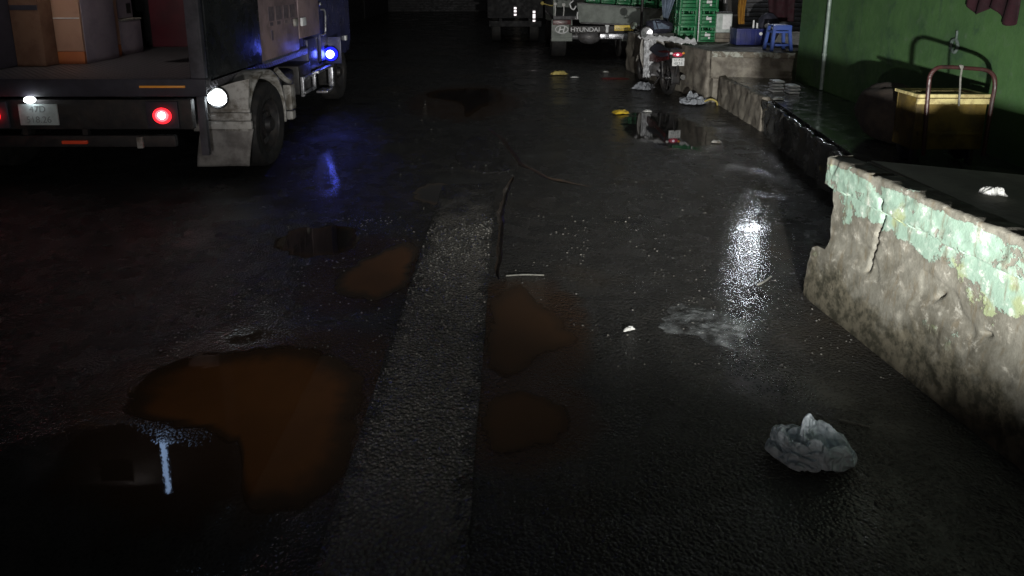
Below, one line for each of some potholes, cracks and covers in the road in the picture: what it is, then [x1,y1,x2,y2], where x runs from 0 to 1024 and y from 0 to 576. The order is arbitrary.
pothole [481,389,571,454]
pothole [273,225,361,258]
pothole [123,345,366,515]
pothole [486,285,579,376]
pothole [332,242,419,302]
crack [488,129,589,279]
